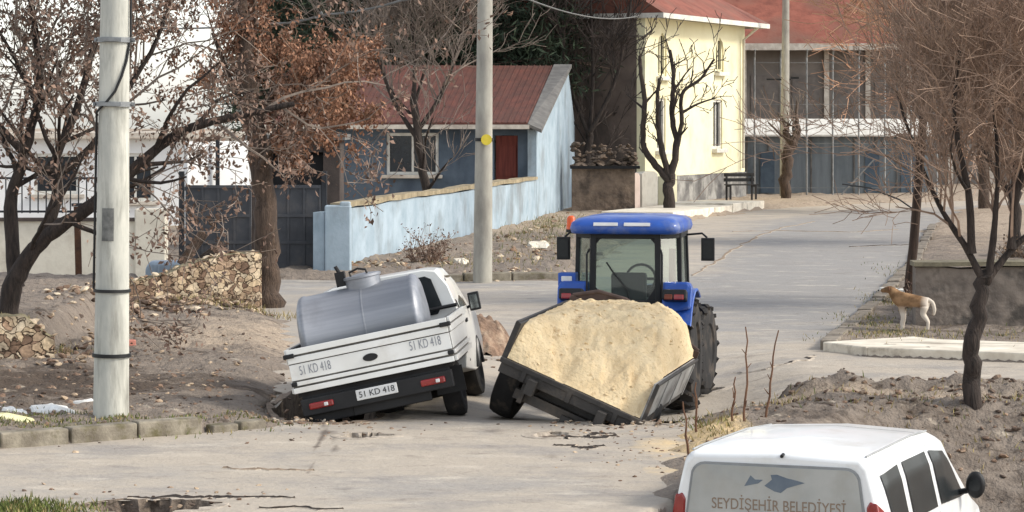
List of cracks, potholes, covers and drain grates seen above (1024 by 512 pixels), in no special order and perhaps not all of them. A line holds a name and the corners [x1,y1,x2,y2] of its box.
pothole [266,390,385,424]
pothole [70,497,229,512]
crack [127,494,344,511]
